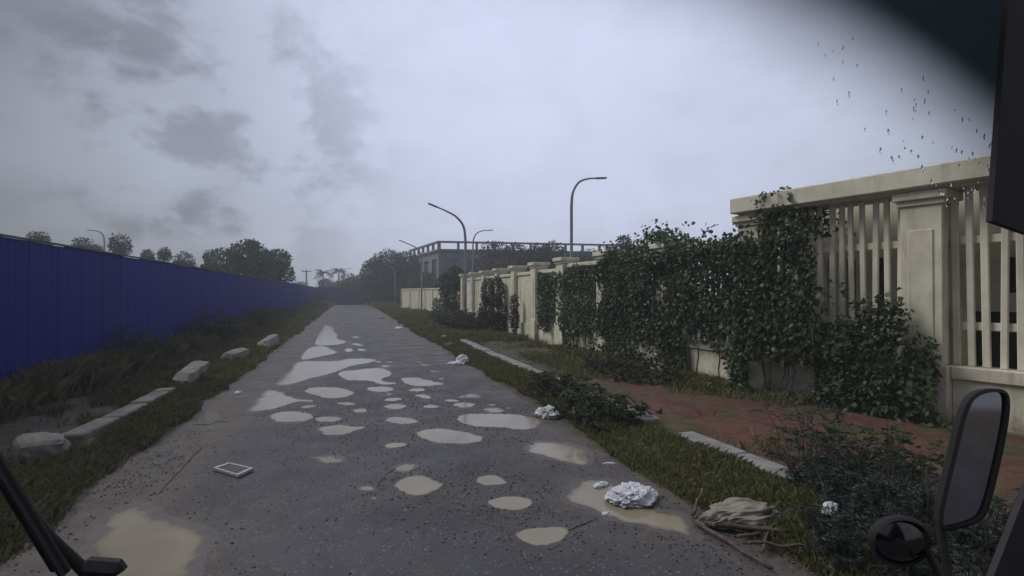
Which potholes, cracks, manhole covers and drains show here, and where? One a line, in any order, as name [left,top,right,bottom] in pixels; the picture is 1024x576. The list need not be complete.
pothole [79,502,221,576]
pothole [523,440,595,466]
pothole [456,413,541,429]
pothole [416,428,484,444]
pothole [559,477,705,541]
